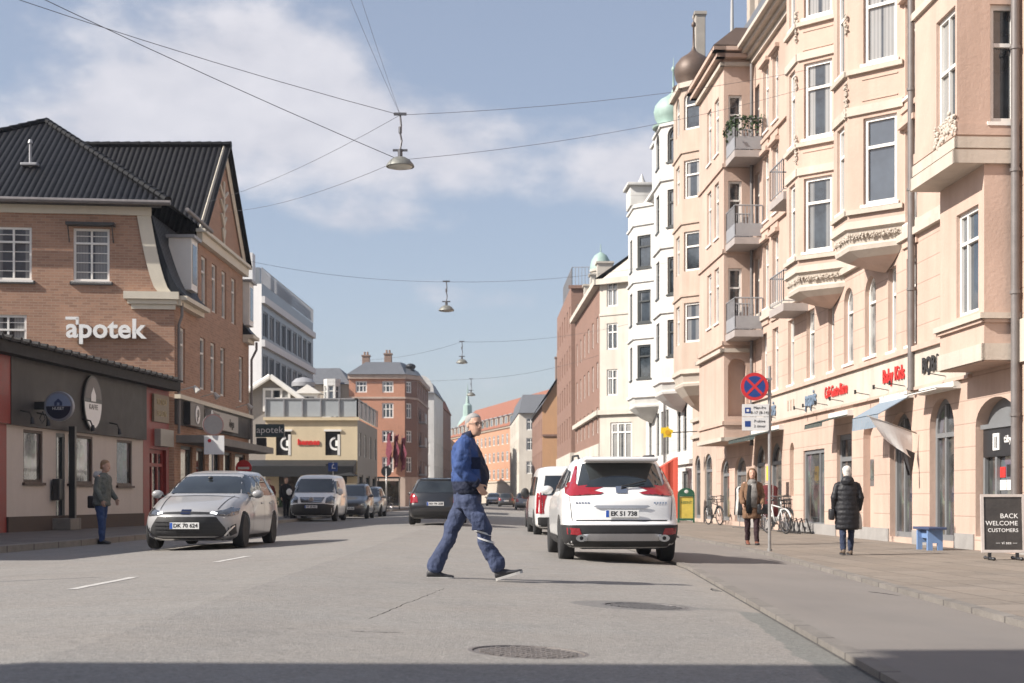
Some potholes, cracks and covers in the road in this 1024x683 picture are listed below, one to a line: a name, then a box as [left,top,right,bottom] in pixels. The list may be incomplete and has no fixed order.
crack [356,589,443,633]
manhole cover [468,645,589,659]
manhole cover [602,602,690,610]
